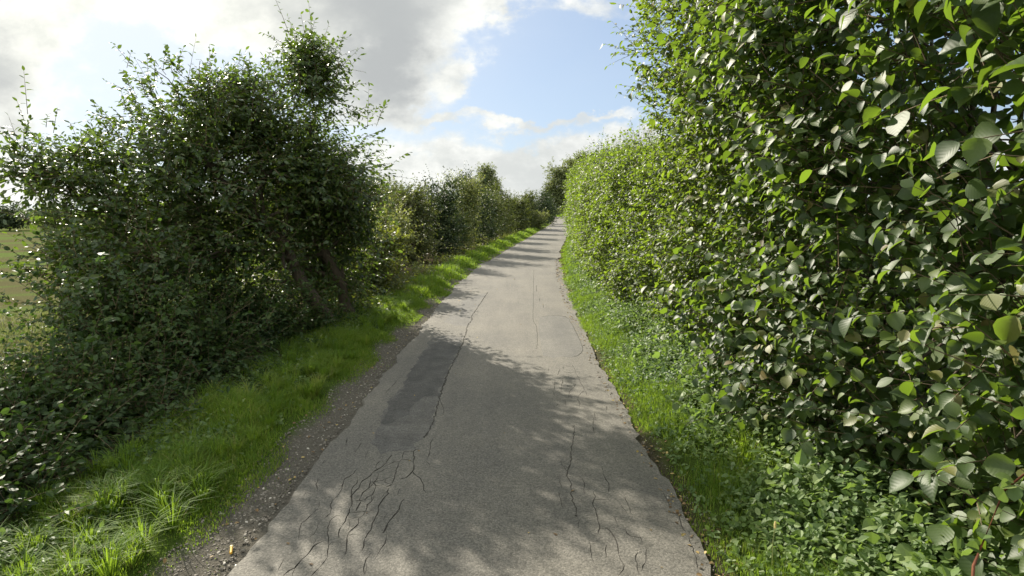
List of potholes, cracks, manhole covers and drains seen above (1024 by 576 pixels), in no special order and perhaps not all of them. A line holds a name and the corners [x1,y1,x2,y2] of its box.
crack [558,425,647,575]
crack [533,278,607,433]
crack [278,441,432,575]
